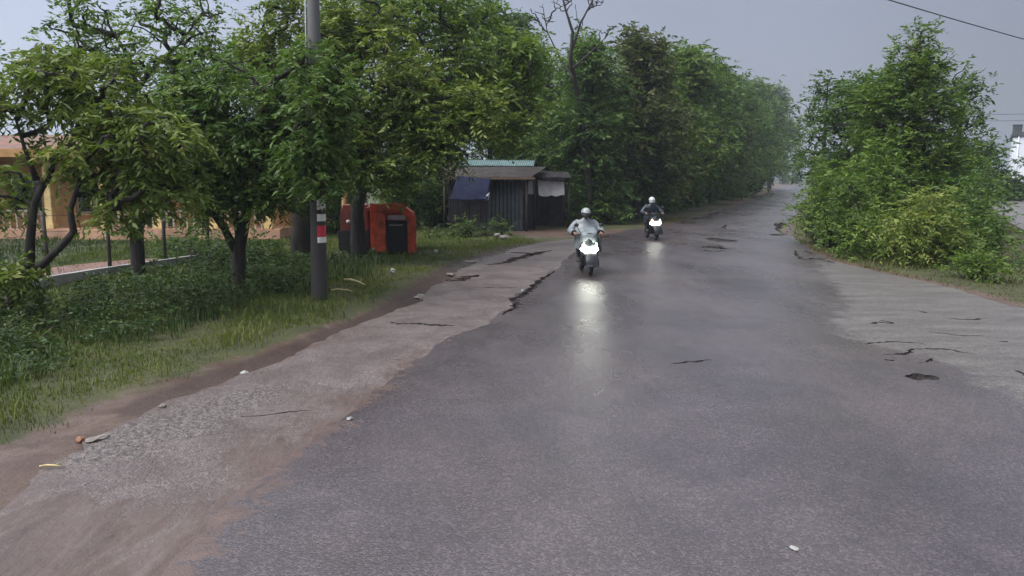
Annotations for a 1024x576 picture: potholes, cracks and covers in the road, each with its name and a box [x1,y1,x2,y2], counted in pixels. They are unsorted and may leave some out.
crack [793,250,834,263]
crack [446,250,552,288]
crack [867,318,985,363]
